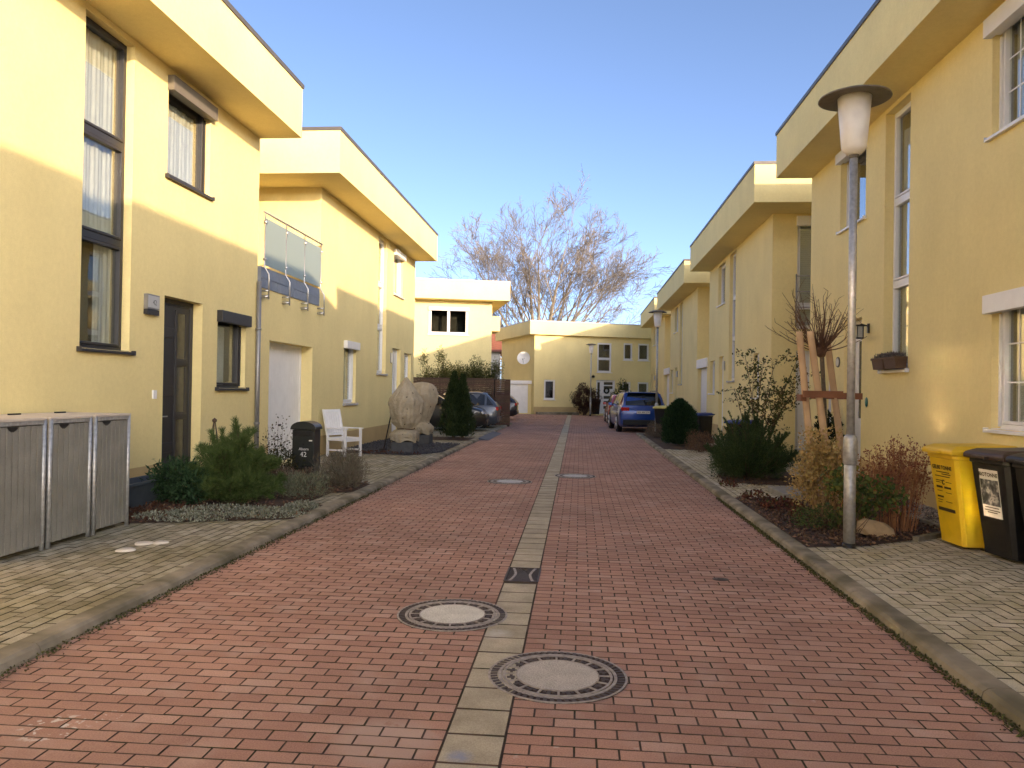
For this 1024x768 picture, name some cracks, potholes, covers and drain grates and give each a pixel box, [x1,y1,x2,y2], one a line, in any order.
drain grate [503,567,541,583]
manhole cover [488,651,628,705]
manhole cover [397,599,507,633]
